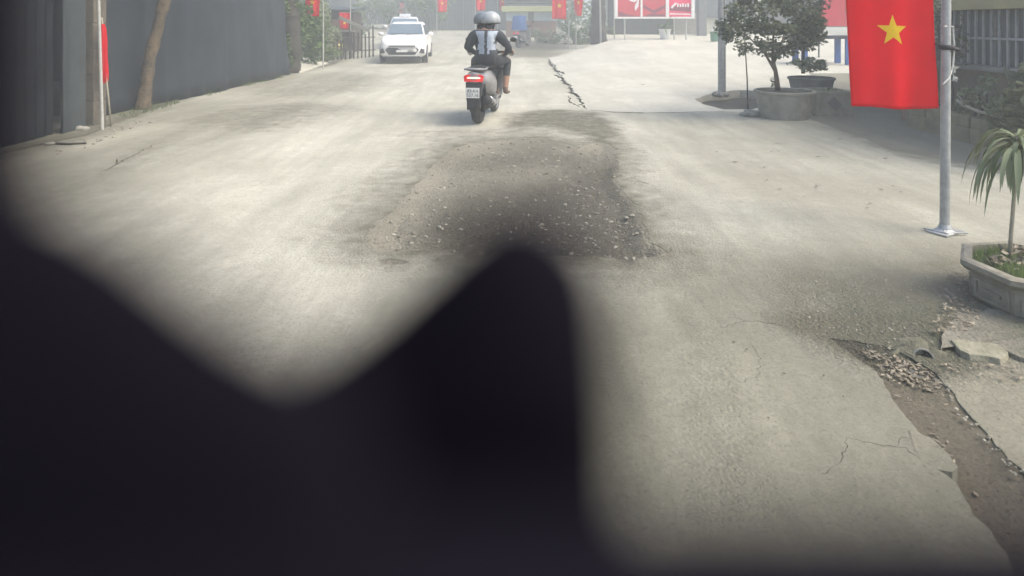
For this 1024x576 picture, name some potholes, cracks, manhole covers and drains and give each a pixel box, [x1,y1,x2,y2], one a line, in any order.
pothole [366,137,667,266]
